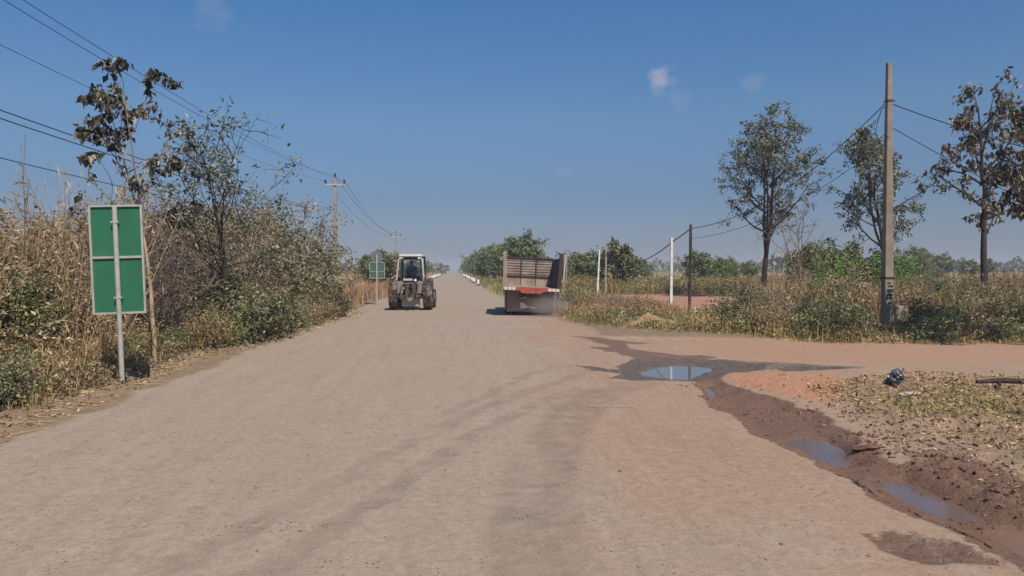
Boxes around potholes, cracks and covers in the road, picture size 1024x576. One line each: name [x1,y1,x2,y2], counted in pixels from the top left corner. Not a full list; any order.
pothole [597,359,761,381]
pothole [871,529,998,565]
